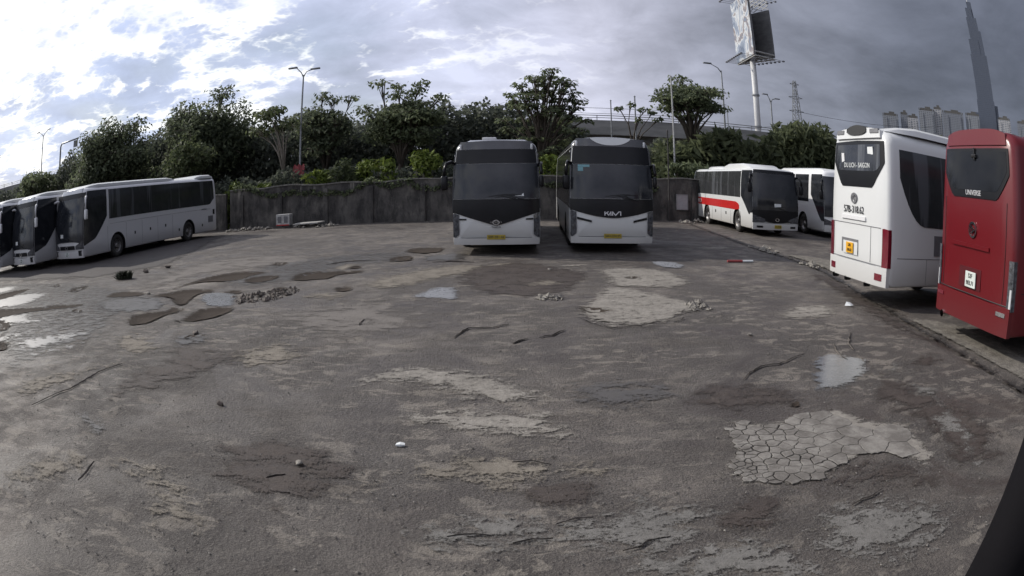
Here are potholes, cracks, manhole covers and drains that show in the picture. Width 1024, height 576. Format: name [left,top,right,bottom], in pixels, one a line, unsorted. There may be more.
pothole [184,307,236,321]
pothole [127,307,184,325]
crack [724,410,921,505]
pothole [292,270,366,281]
crack [744,354,803,379]
crack [455,324,563,343]
crack [32,363,122,405]
